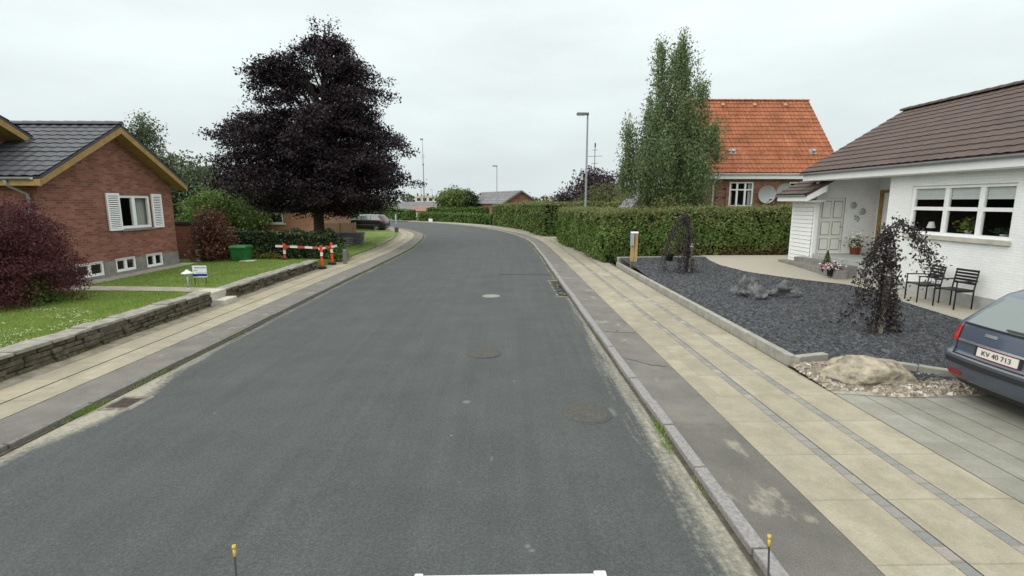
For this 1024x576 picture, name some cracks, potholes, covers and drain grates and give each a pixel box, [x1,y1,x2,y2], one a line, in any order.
manhole cover [466,348,502,359]
manhole cover [561,404,612,424]
